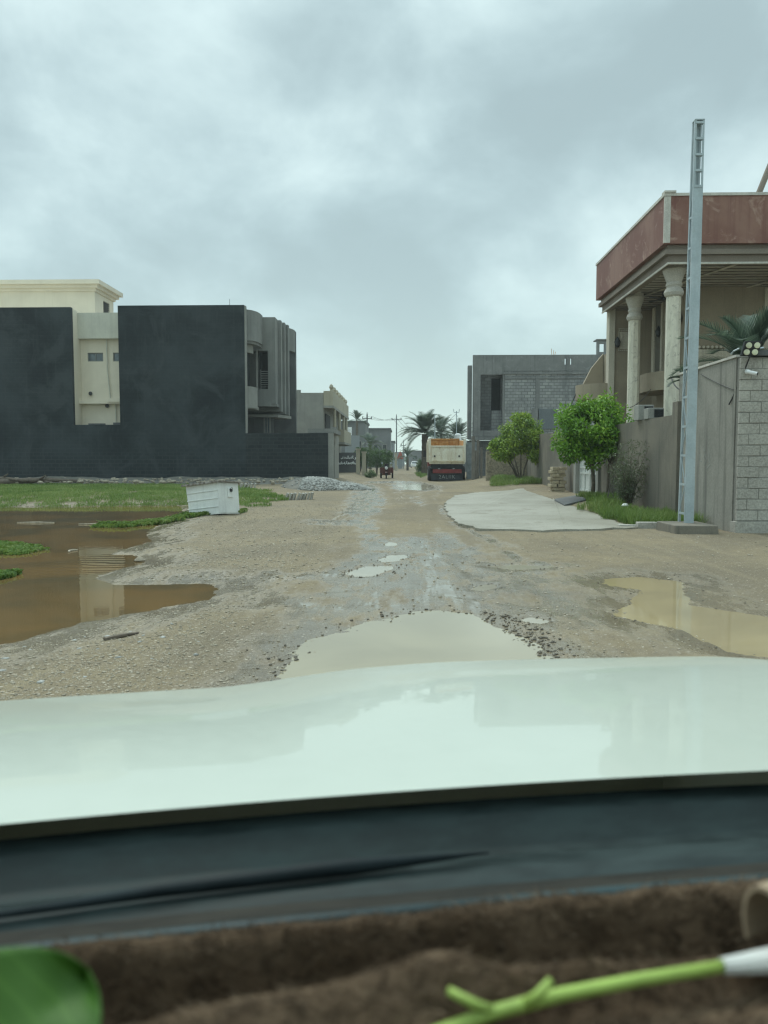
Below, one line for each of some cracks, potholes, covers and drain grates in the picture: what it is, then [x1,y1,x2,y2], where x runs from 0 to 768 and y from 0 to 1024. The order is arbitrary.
pothole [245,605,587,684]
pothole [367,551,425,563]
pothole [330,563,408,578]
pothole [571,573,768,660]
